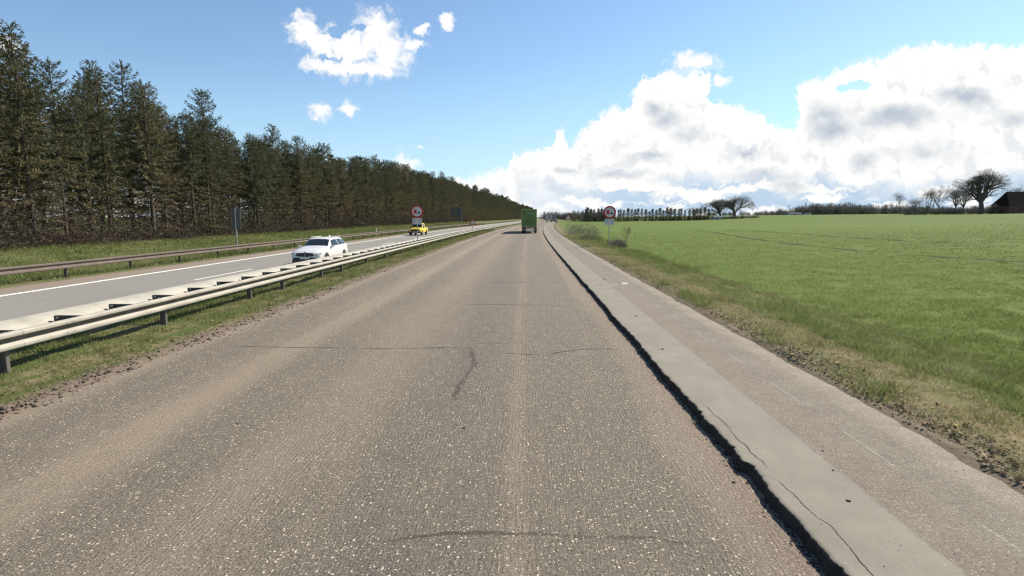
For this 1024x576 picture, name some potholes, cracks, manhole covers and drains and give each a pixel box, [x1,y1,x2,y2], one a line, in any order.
crack [701,404,874,576]
